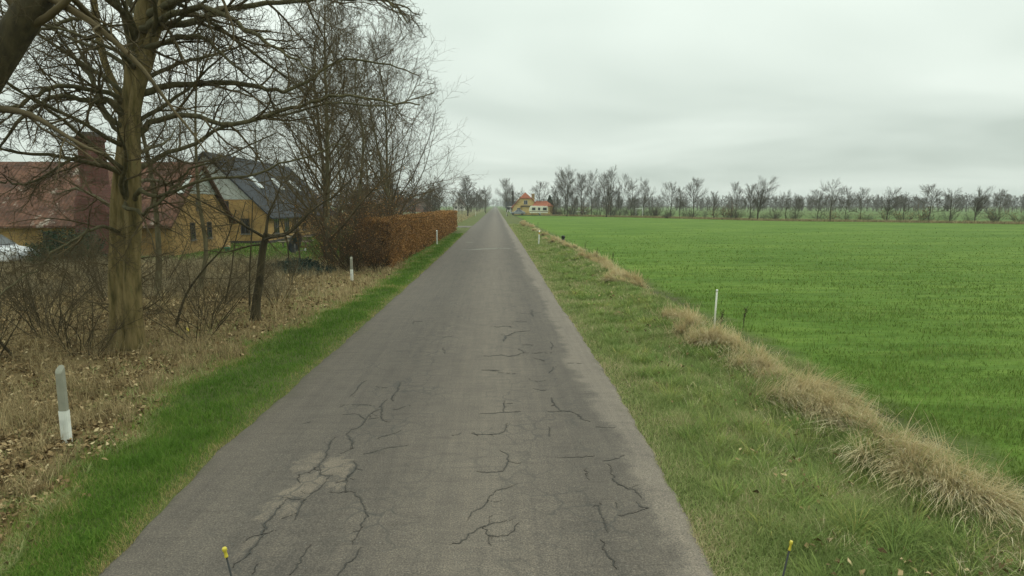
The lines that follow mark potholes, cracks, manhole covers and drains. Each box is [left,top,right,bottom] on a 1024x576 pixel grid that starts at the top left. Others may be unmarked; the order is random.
crack [488,310,610,435]
crack [233,380,407,575]
crack [555,456,648,569]
crack [451,403,521,546]
